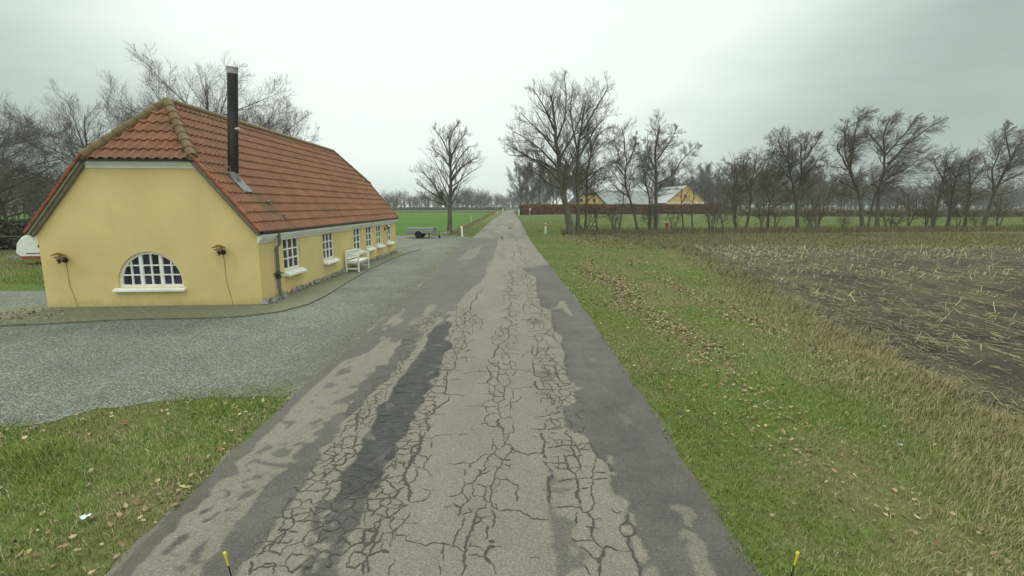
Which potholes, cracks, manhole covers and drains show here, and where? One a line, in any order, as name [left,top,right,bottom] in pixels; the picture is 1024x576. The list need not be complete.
crack [388,244,642,576]
crack [244,289,484,575]
